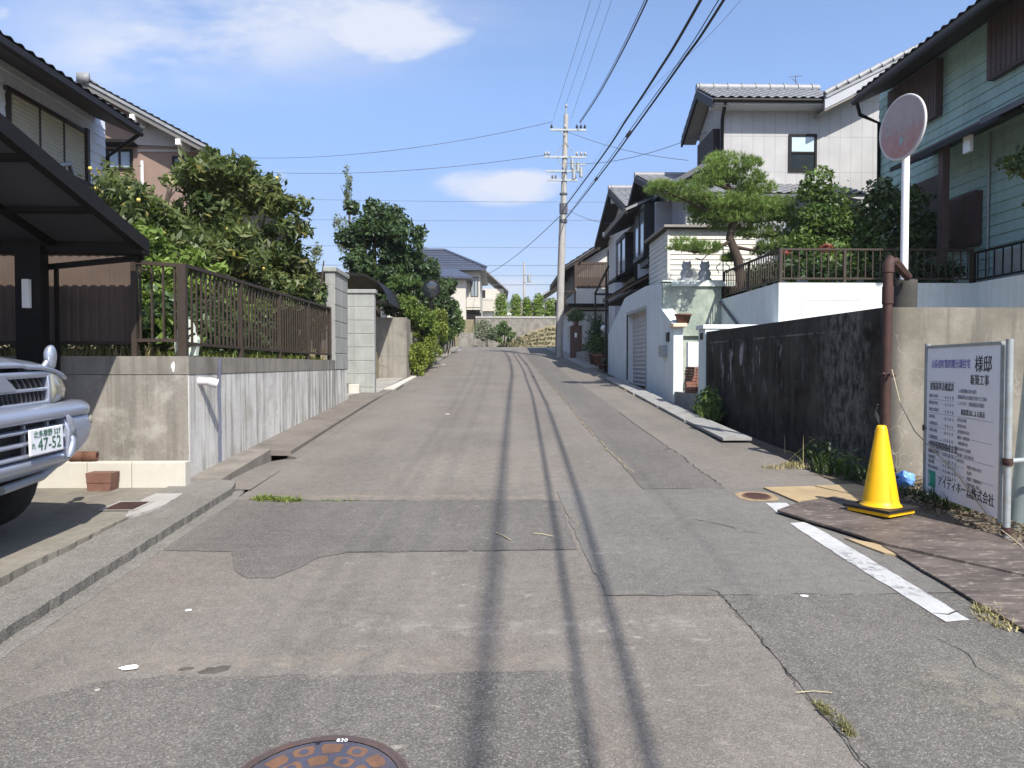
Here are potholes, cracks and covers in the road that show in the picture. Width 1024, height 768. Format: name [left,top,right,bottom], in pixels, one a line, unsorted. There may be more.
manhole cover [735,492,779,501]
manhole cover [241,735,409,768]
crack [708,588,870,768]
